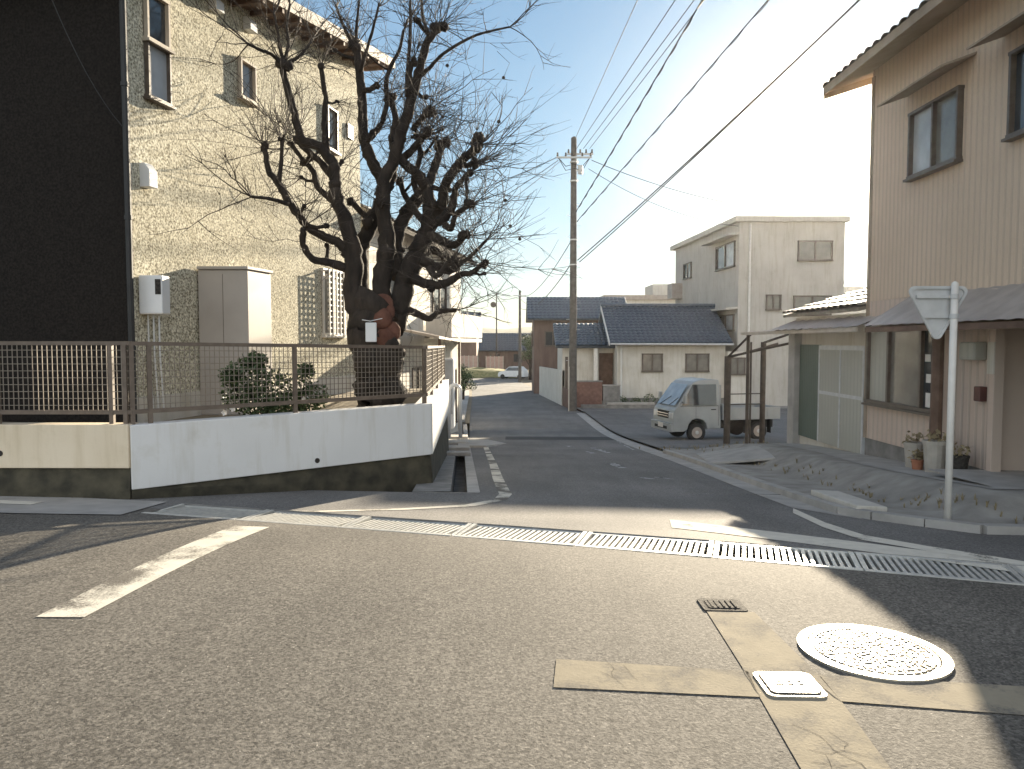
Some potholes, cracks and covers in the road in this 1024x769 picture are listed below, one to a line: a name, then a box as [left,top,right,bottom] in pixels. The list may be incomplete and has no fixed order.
drain grate [576,532,714,558]
drain grate [452,523,588,546]
drain grate [142,504,269,520]
drain grate [236,510,367,527]
drain grate [338,516,472,536]
drain grate [713,541,863,571]
utility cover [753,671,827,699]
drain grate [854,552,1024,586]
crack [793,724,867,768]
manhole cover [797,624,954,682]
